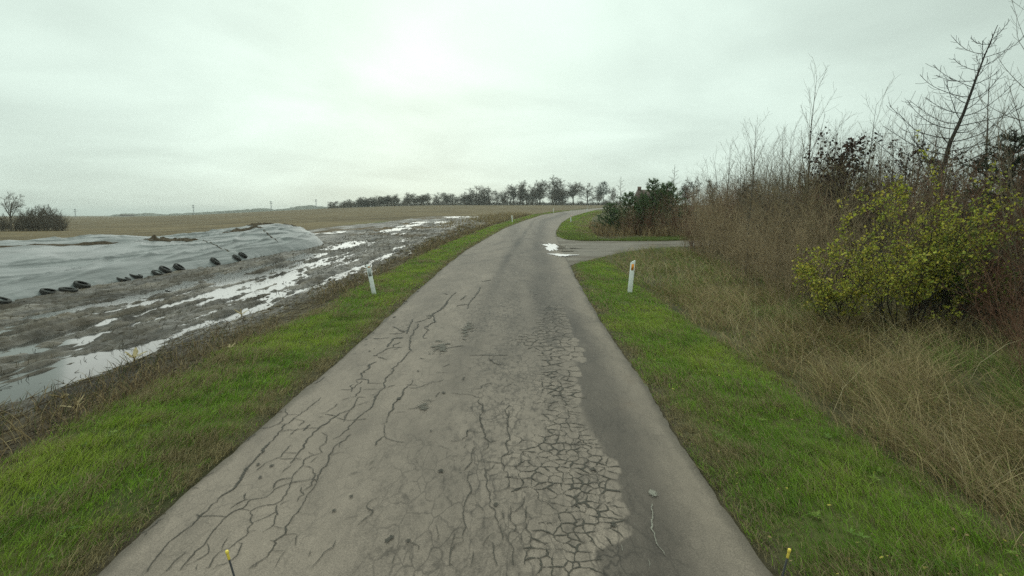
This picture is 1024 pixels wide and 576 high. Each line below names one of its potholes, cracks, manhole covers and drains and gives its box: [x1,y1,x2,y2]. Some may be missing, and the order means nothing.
crack [649,504,665,568]
crack [140,280,626,576]
